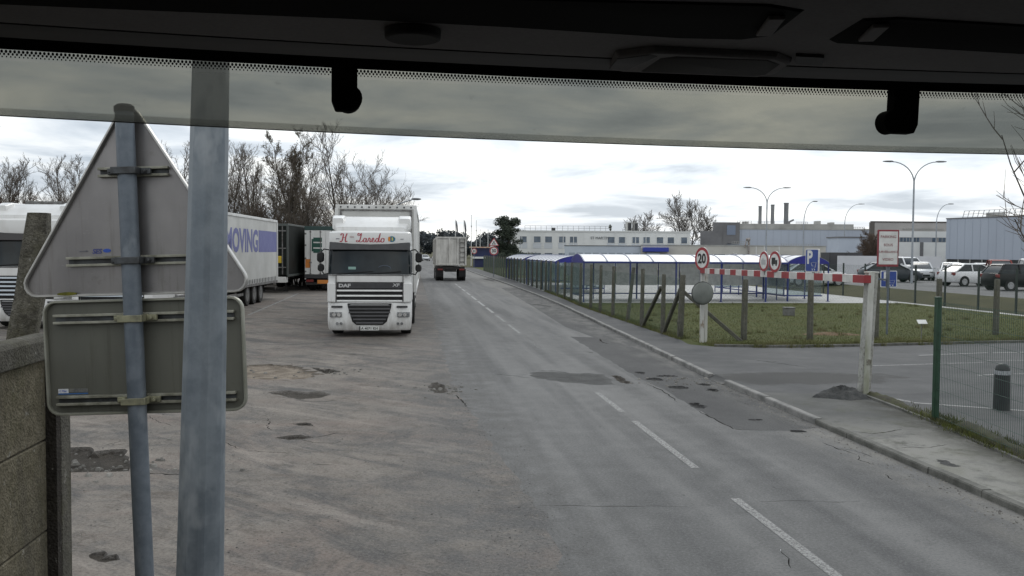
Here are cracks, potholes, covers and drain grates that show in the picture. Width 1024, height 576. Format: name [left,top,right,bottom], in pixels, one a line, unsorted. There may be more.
pothole [247,364,325,380]
pothole [428,382,448,393]
pothole [71,447,130,473]
crack [822,429,946,480]
pothole [89,551,120,563]
